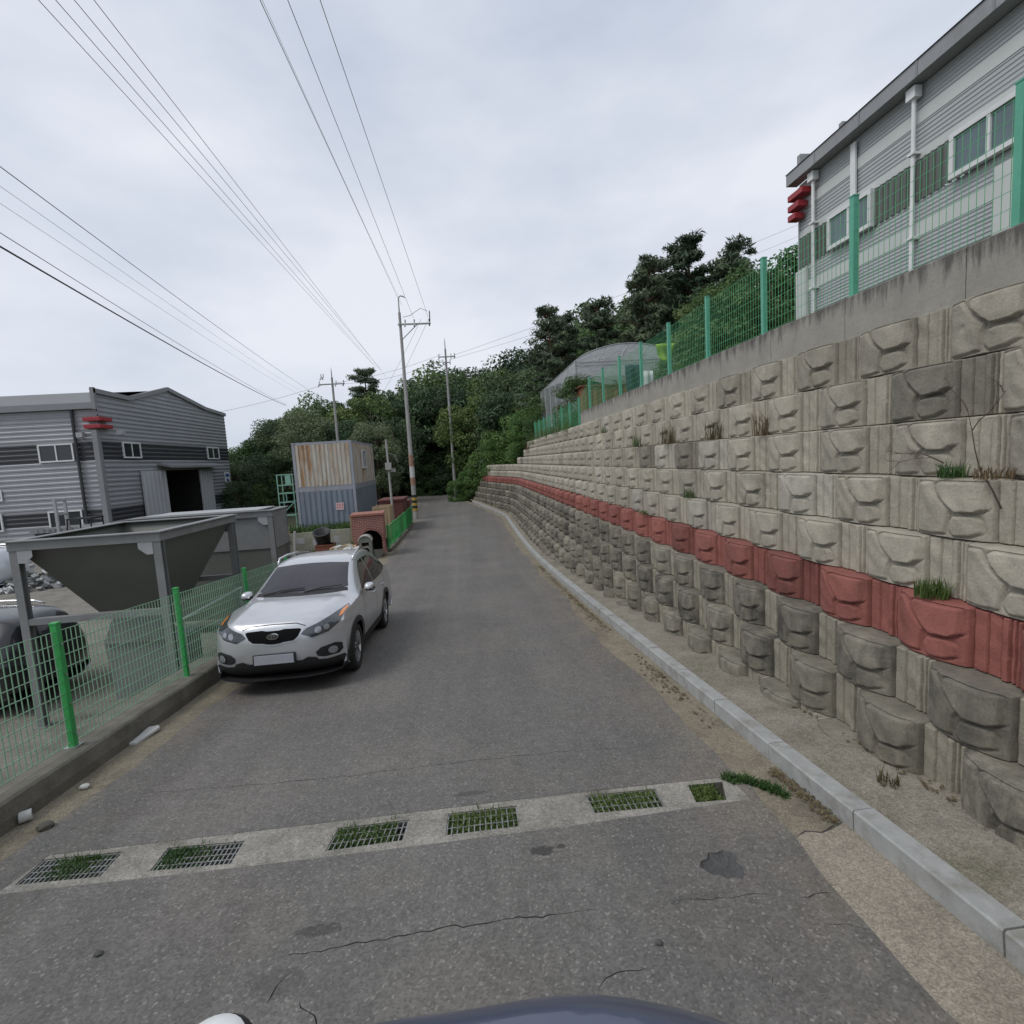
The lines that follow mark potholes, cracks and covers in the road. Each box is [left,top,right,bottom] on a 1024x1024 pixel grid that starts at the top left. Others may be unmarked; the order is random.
crack [281,909,594,958]
crack [131,745,654,795]
drain grate [326,820,409,851]
drain grate [586,789,665,813]
drain grate [446,806,520,835]
crack [599,968,645,988]
crack [798,822,842,836]
drain grate [17,852,123,885]
drain grate [151,842,244,871]
